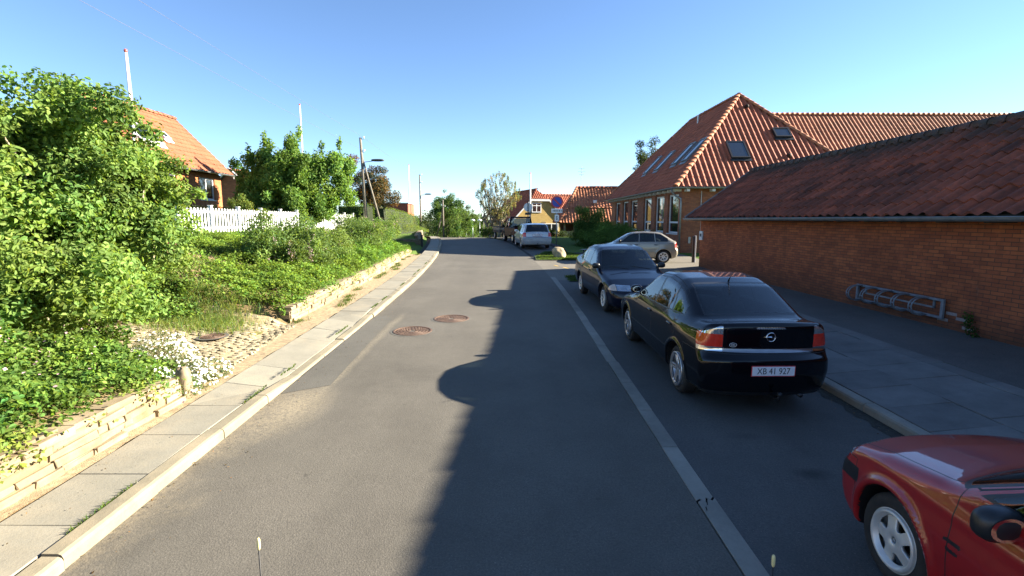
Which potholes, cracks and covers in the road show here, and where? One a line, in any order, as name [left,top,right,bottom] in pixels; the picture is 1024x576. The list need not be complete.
manhole cover [390,326,435,337]
manhole cover [431,314,472,323]
